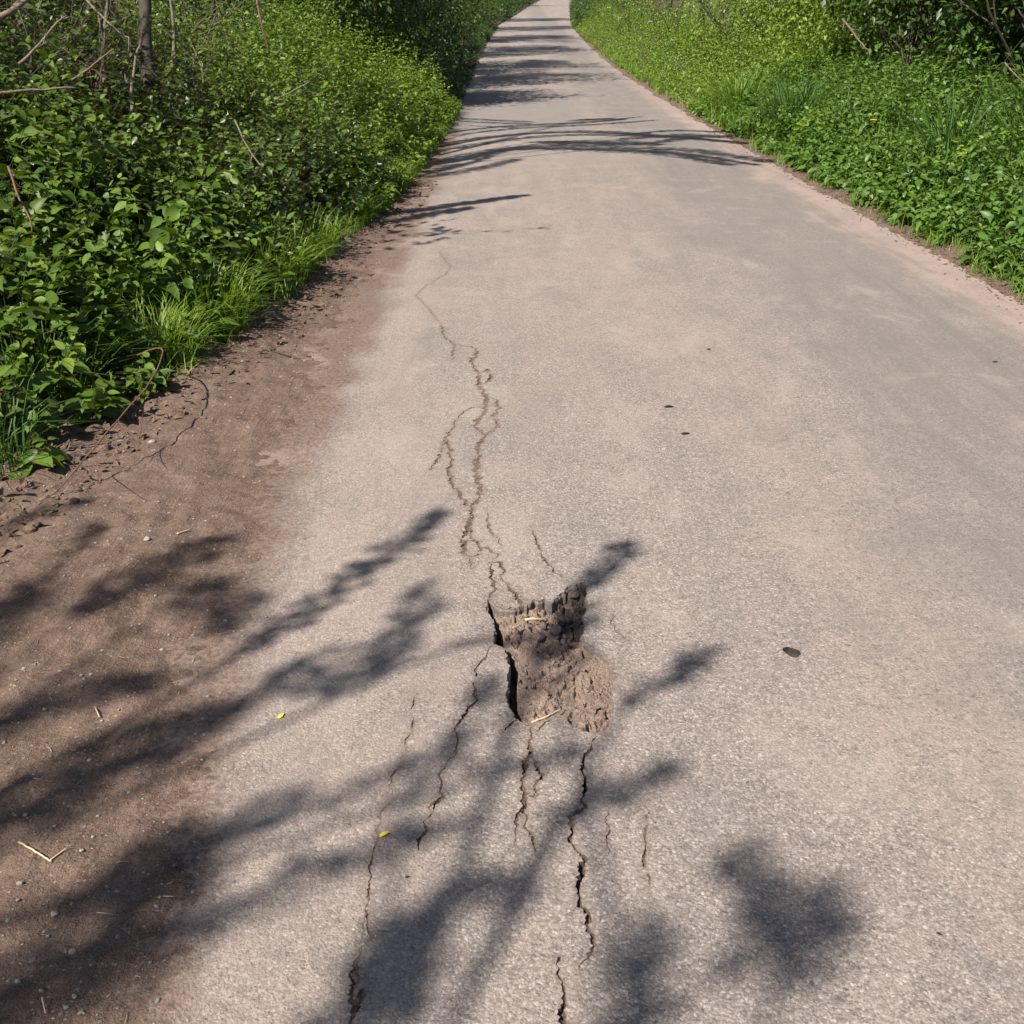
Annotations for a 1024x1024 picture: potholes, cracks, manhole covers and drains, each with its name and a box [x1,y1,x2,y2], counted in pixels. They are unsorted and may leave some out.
crack [416,253,524,605]
crack [416,646,494,851]
